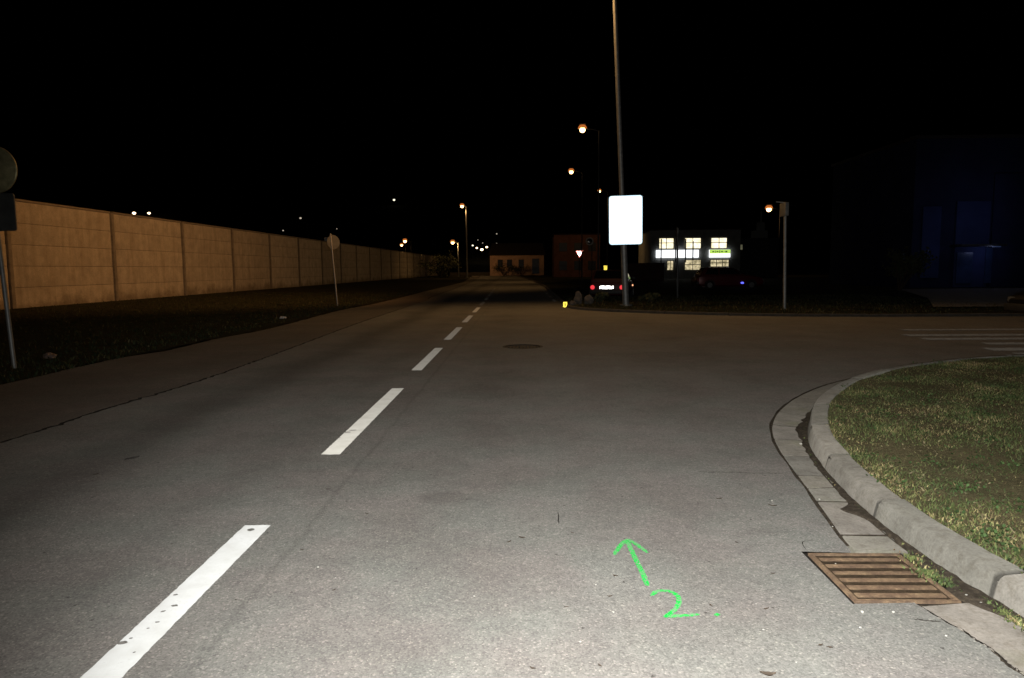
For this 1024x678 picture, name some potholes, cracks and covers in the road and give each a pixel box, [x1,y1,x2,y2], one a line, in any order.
drain grate [803,553,965,605]
